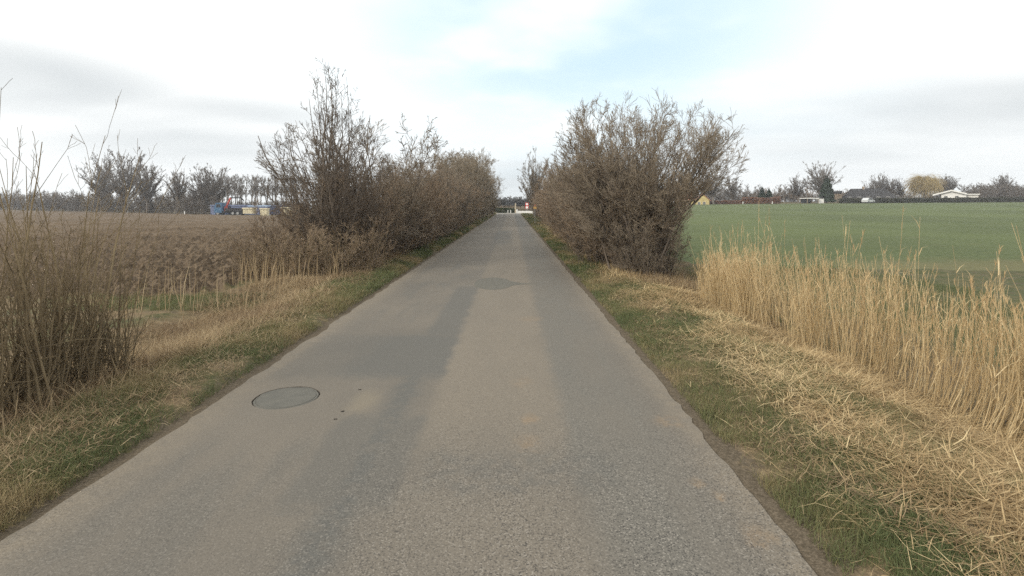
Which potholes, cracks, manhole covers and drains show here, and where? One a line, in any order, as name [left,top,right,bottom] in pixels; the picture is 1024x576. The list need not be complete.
manhole cover [251,386,320,410]
